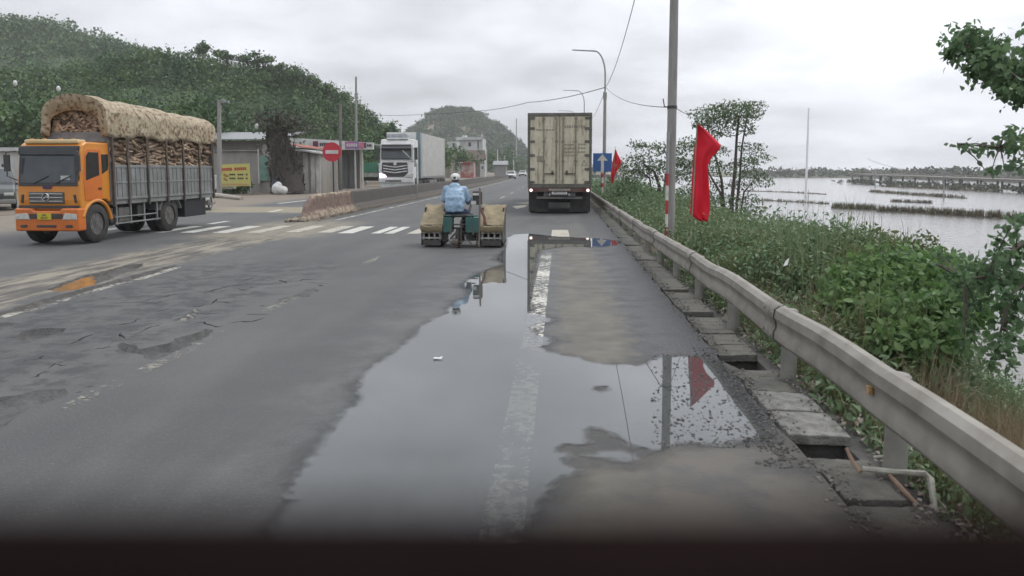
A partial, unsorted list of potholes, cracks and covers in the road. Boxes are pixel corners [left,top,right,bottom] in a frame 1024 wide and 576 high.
pothole [116,329,213,360]
pothole [7,328,66,341]
crack [69,278,263,349]
